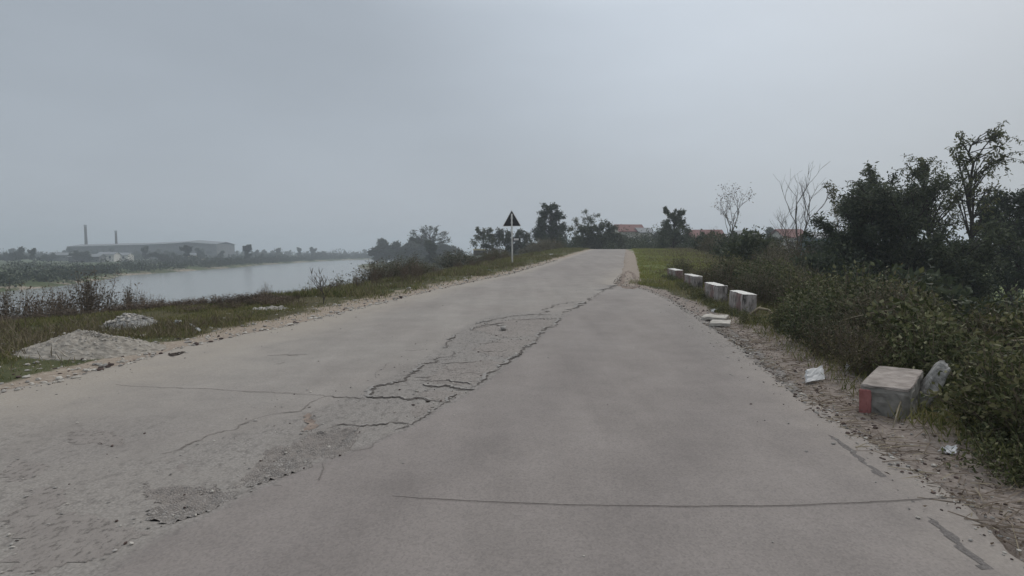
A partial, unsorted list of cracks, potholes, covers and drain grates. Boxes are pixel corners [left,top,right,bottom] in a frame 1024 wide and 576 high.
pothole [141,482,239,524]
crack [126,281,630,454]
pothole [231,427,359,489]
